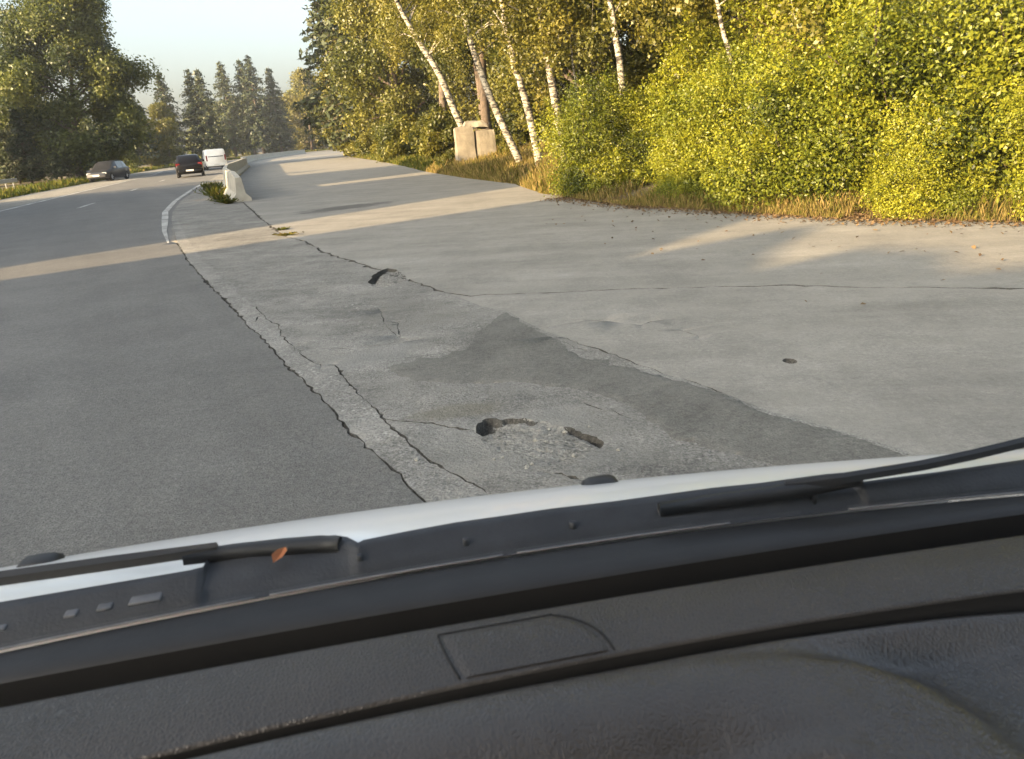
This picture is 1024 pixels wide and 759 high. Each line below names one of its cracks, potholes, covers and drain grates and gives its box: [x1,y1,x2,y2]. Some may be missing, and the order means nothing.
crack [177,243,487,503]
pothole [476,418,604,465]
pothole [368,268,406,287]
